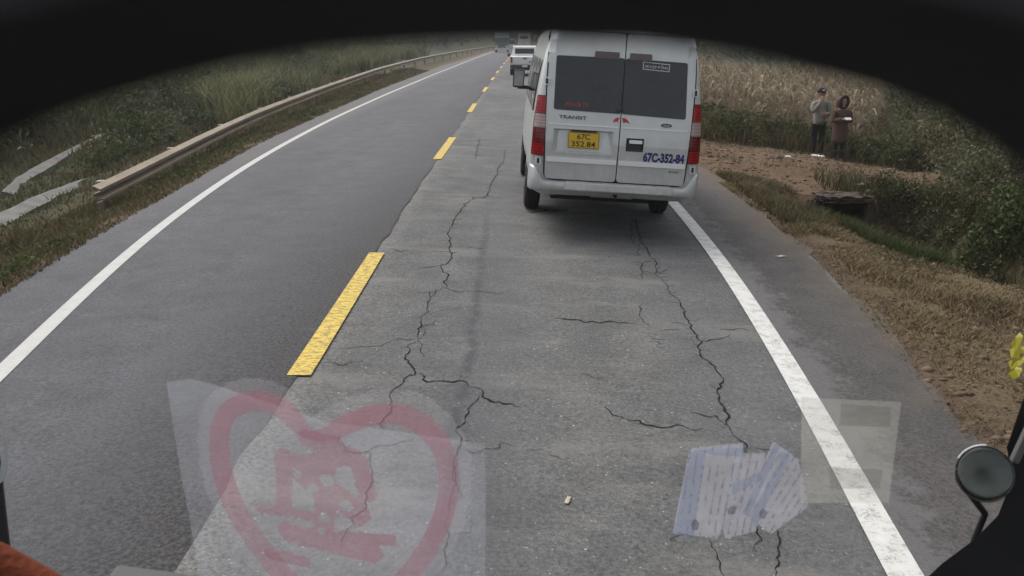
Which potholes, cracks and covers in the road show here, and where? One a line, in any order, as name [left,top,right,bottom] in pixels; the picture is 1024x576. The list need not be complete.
crack [559,218,781,575]
crack [333,152,515,567]
